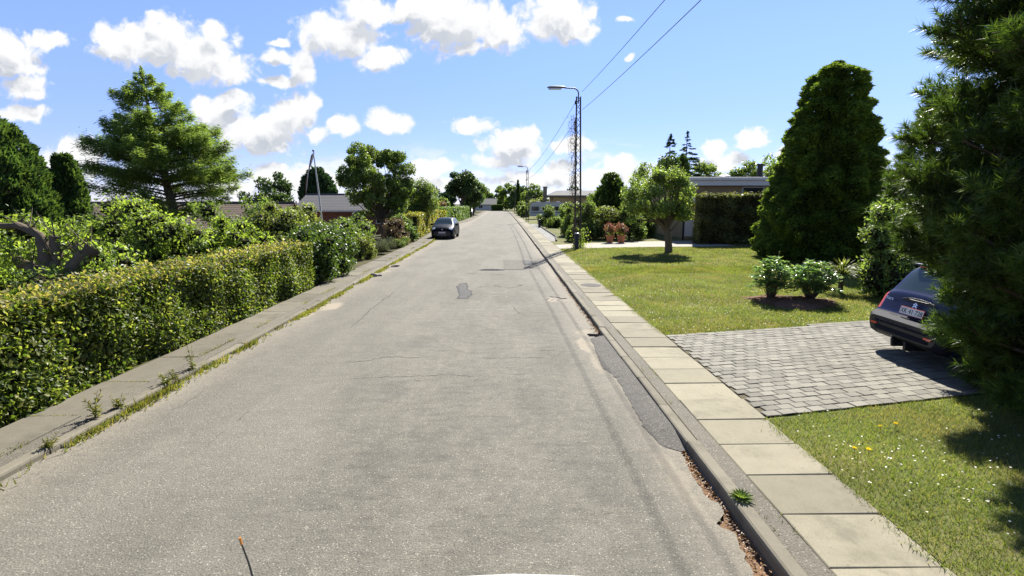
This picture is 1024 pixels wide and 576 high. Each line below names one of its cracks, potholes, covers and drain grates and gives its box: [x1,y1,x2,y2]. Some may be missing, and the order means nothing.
crack [347,357,470,381]
